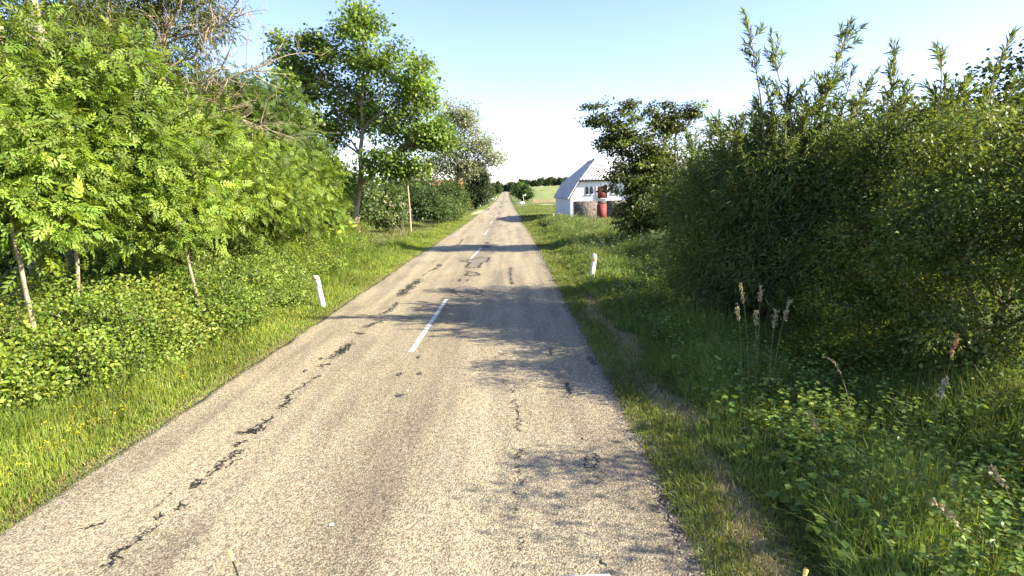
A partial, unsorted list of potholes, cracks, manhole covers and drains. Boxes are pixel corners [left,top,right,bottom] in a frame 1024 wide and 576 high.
crack [510,389,529,518]
